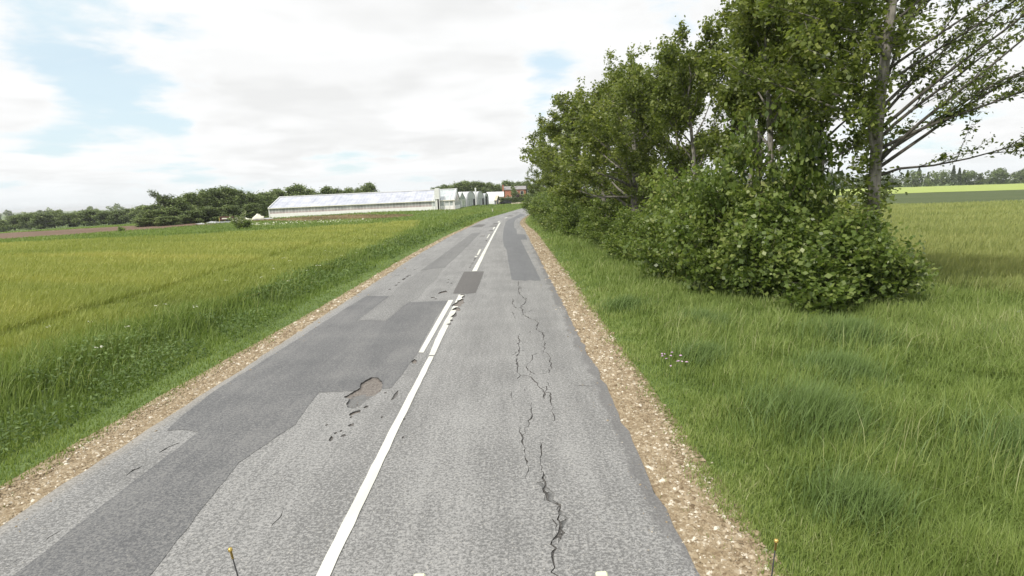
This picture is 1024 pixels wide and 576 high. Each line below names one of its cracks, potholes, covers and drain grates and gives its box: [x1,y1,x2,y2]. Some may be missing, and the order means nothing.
pothole [344,377,383,408]
crack [511,281,569,576]
